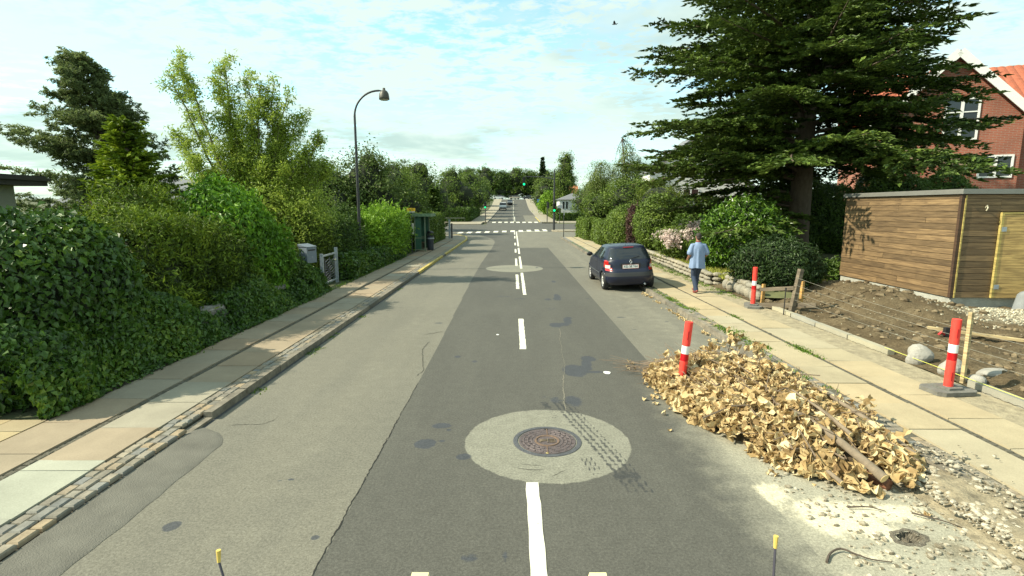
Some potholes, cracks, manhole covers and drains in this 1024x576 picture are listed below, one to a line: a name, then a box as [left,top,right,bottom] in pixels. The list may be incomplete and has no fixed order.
manhole cover [513,427,582,457]
crack [559,329,567,410]
pothole [889,528,930,547]
